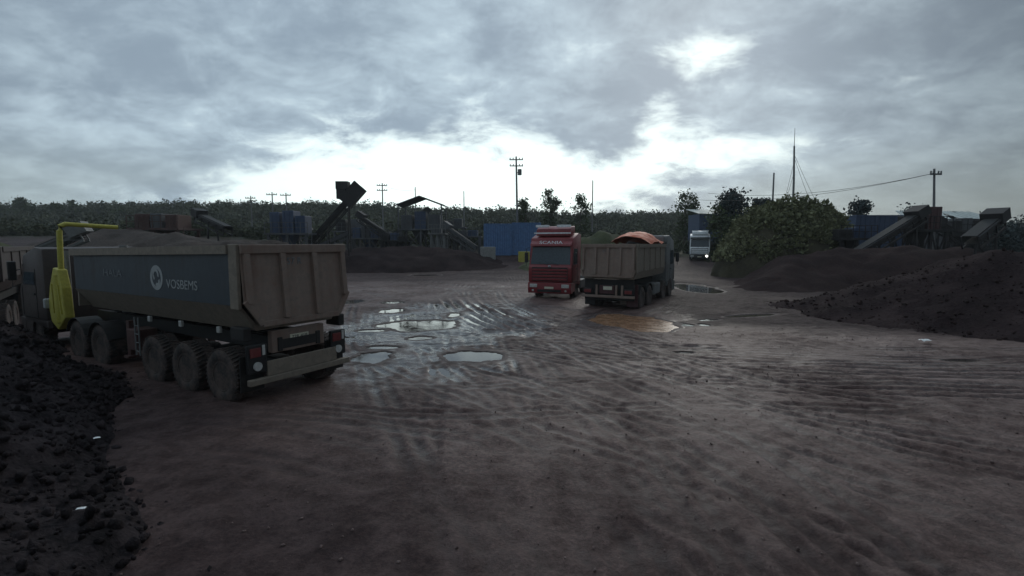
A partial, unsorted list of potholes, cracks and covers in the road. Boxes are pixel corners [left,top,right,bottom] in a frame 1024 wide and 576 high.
pothole [347,350,397,366]
pothole [674,283,727,294]
pothole [370,319,461,333]
pothole [436,349,509,363]
pothole [581,313,684,333]
